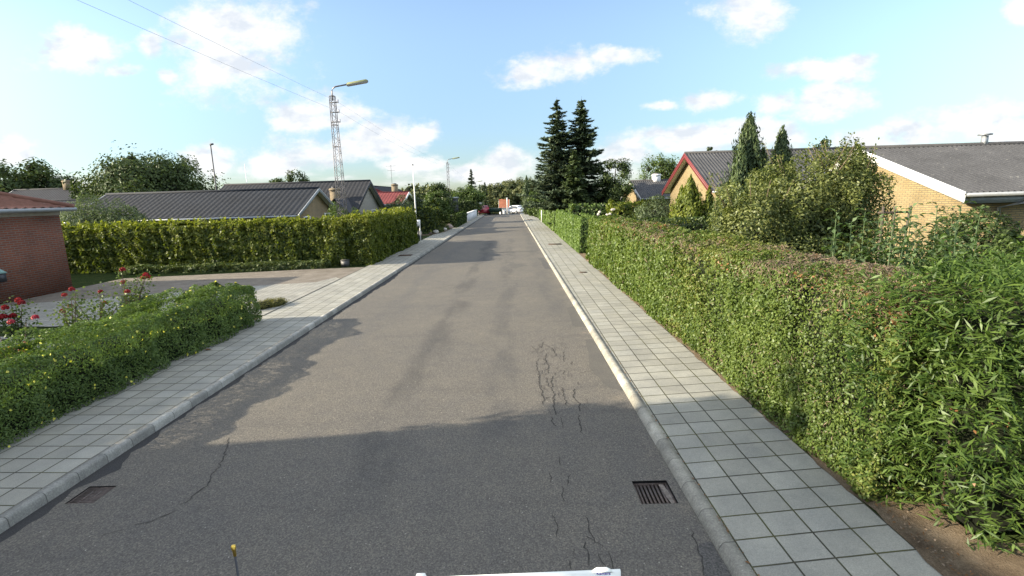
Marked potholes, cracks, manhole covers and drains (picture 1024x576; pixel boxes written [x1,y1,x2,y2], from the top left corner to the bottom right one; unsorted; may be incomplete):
crack [532,345,591,433]
crack [101,437,229,536]
crack [691,529,704,576]
crack [549,456,614,569]
drain grate [632,480,678,504]
drain grate [65,486,116,504]
